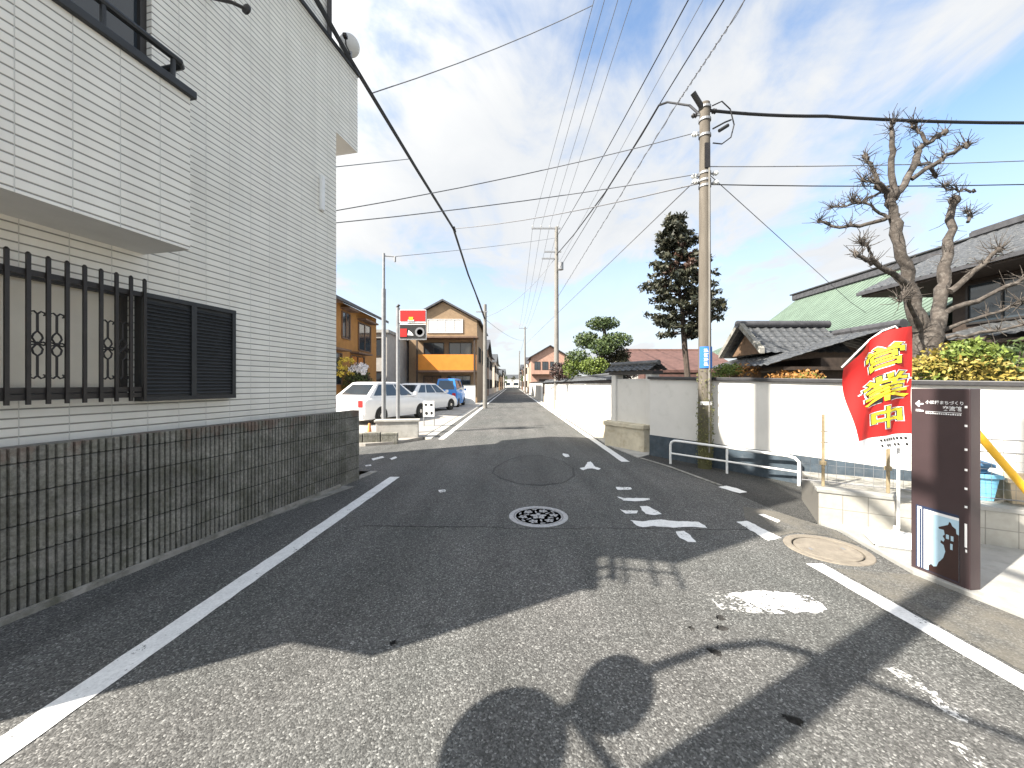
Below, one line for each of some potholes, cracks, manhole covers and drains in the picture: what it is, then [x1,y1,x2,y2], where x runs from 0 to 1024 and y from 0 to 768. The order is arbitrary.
manhole cover [783,534,877,566]
pothole [780,714,805,728]
manhole cover [509,506,568,527]
